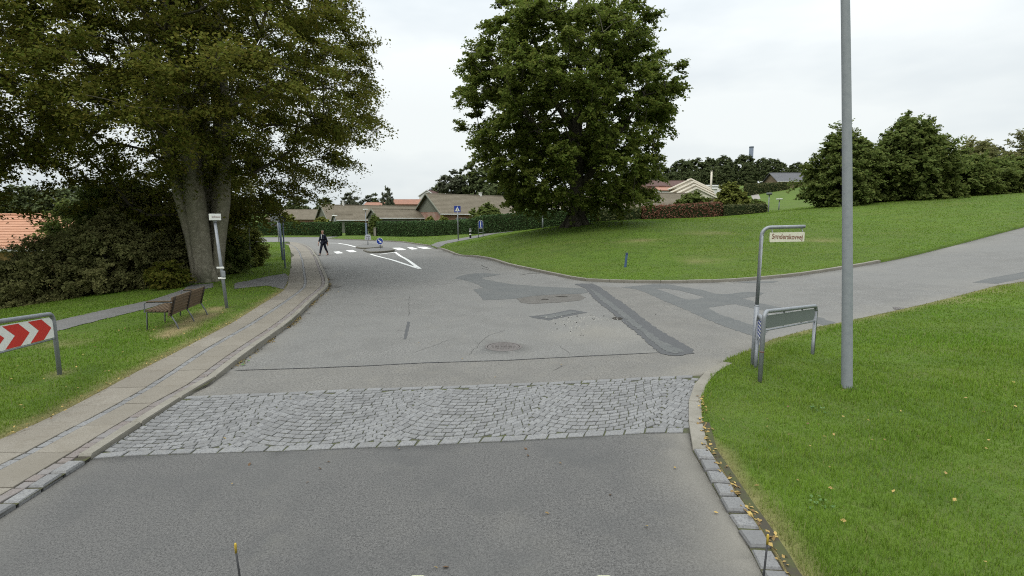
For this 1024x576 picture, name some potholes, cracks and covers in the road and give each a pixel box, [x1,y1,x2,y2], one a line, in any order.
manhole cover [485,342,522,351]
